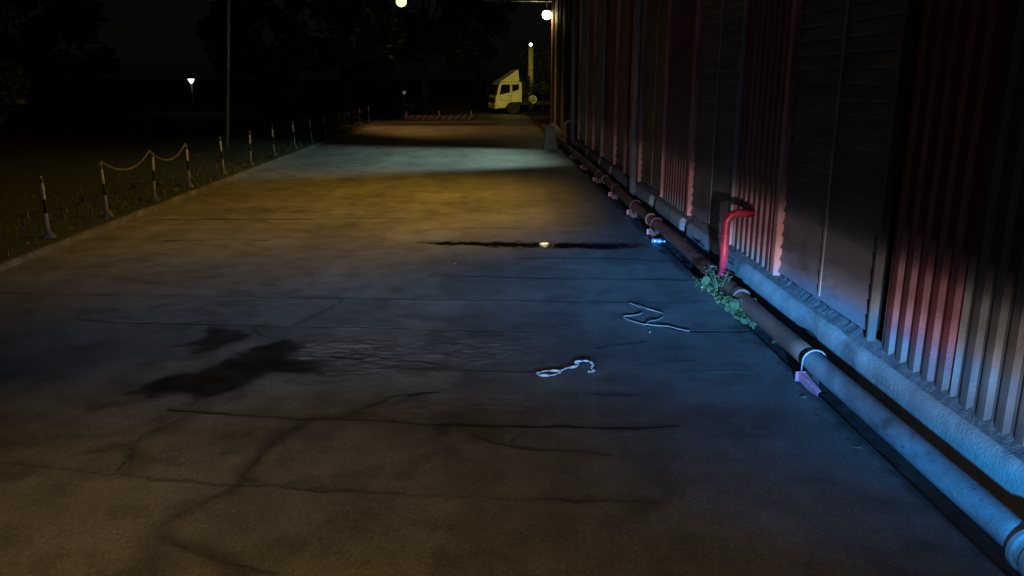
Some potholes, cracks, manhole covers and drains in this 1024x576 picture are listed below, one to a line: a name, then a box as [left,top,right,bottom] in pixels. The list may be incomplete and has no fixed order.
crack [0,257,707,576]
